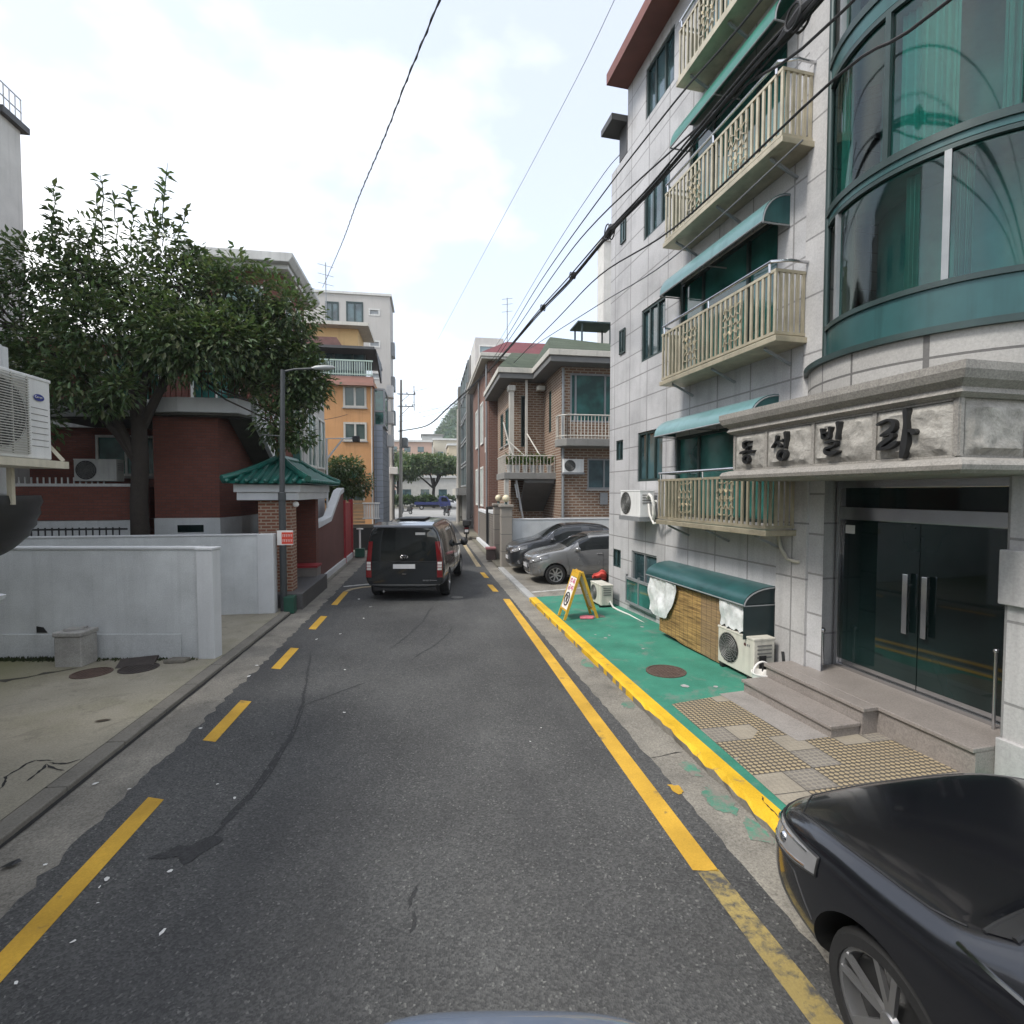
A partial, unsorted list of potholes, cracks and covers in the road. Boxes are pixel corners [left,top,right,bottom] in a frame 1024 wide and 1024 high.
crack [1,760,77,788]
crack [149,633,364,865]
manhole cover [69,667,114,679]
manhole cover [646,665,687,678]
crack [408,884,419,933]
